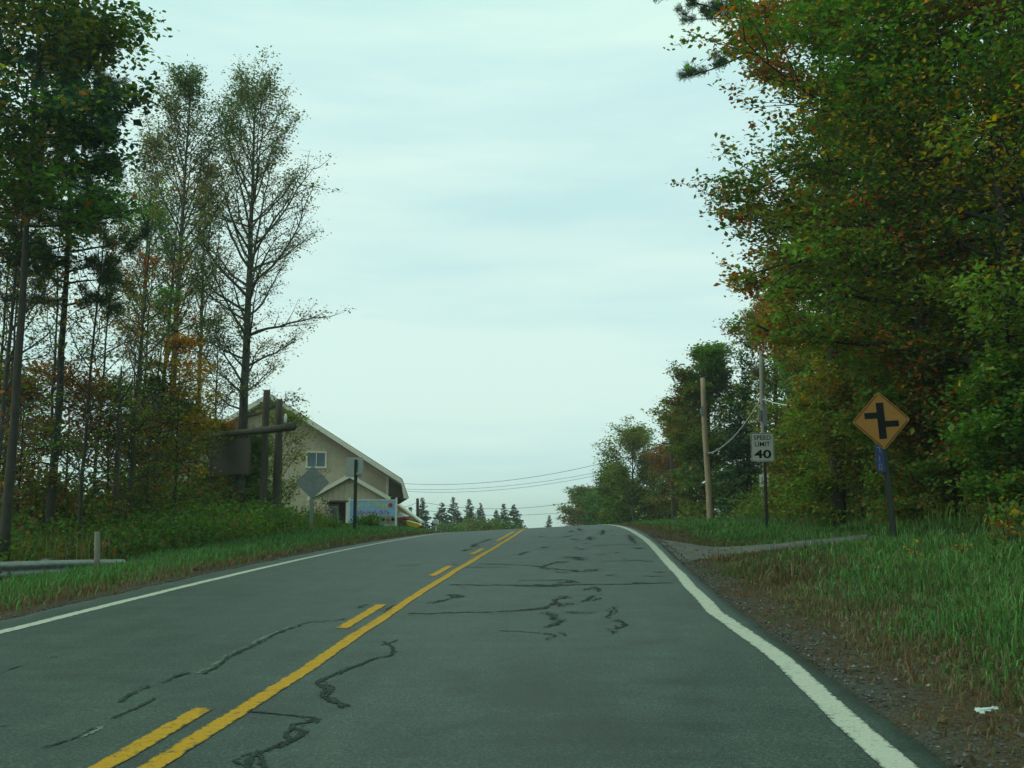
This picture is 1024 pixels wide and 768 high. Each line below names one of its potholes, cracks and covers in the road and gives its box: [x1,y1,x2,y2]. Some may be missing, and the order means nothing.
crack [451,528,674,587]
crack [43,604,395,747]
